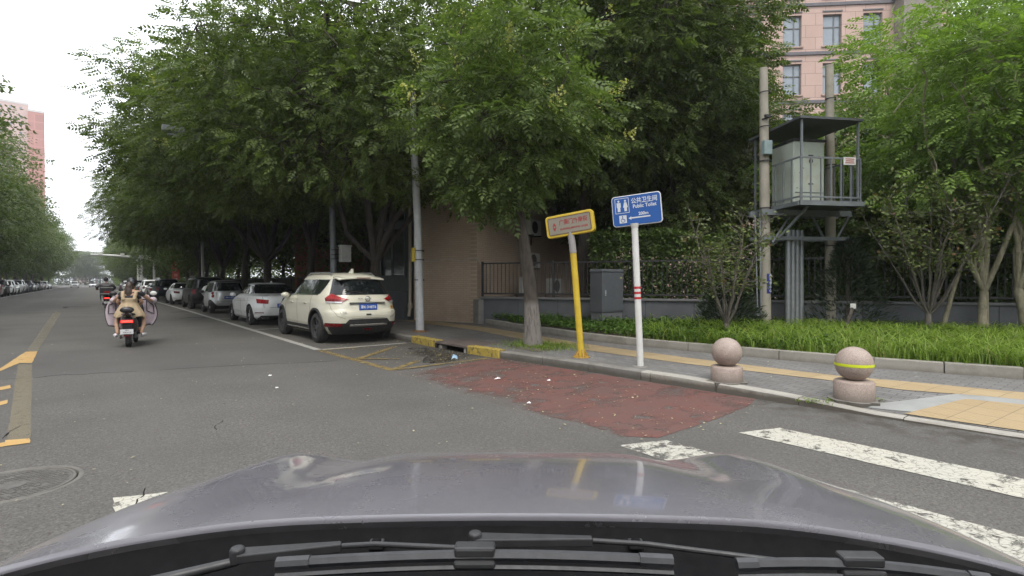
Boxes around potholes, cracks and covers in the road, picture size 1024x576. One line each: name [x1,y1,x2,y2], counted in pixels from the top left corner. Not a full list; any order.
manhole cover [0,465,84,504]
